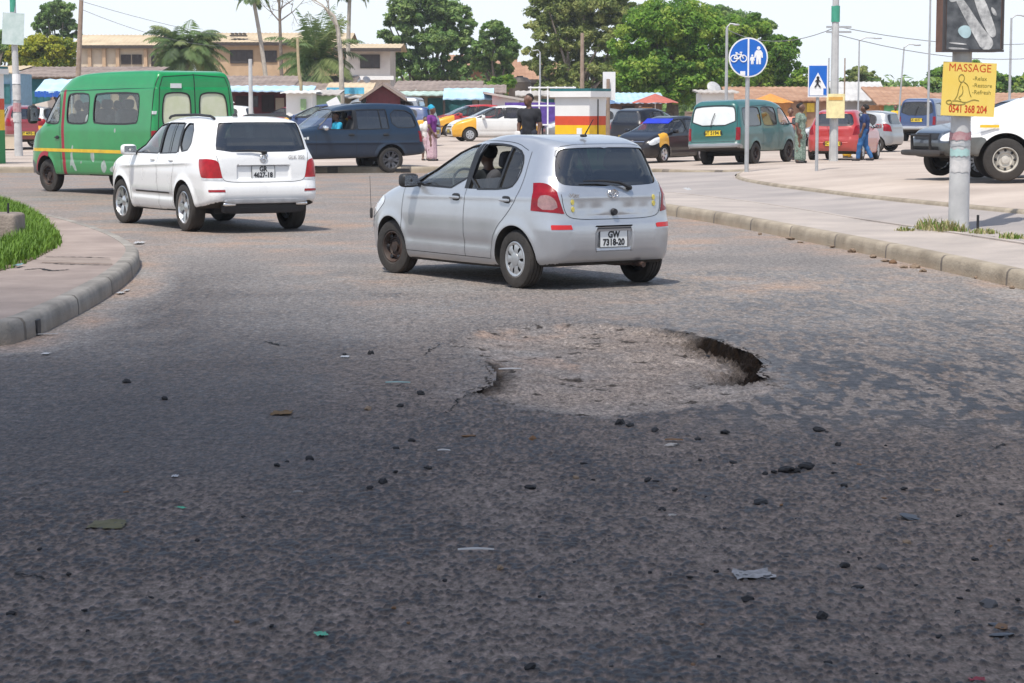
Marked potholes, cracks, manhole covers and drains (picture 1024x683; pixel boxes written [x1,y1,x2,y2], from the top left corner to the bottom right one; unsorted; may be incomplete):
pothole [437,322,793,420]
